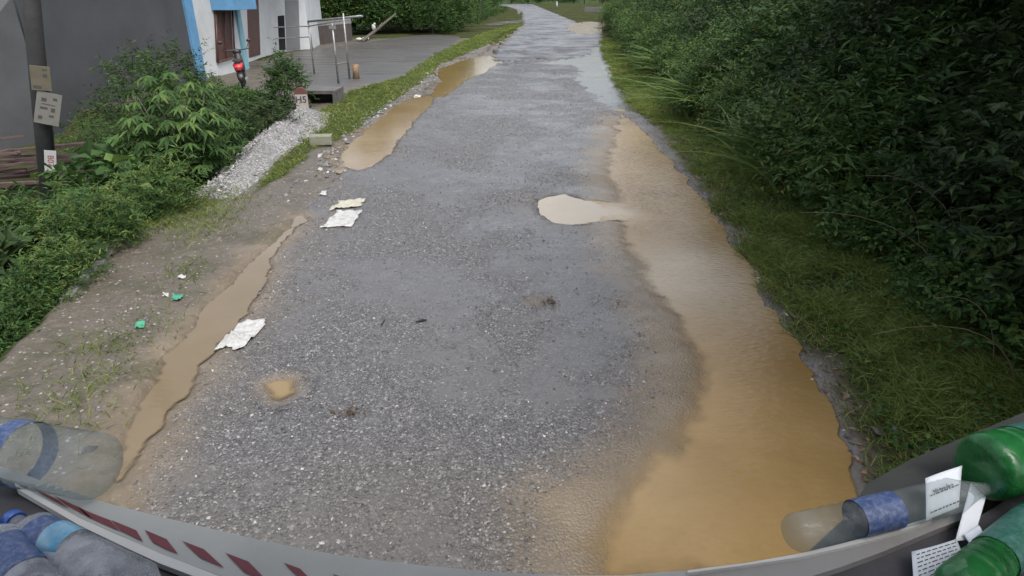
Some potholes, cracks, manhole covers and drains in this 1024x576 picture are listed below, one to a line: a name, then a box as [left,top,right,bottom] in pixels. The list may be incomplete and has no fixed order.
pothole [248,369,315,411]
